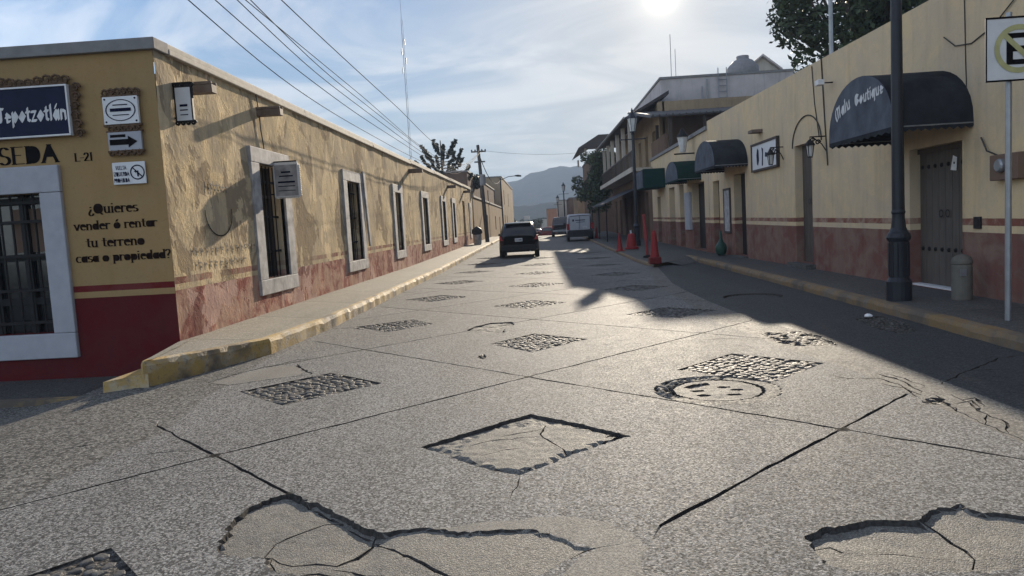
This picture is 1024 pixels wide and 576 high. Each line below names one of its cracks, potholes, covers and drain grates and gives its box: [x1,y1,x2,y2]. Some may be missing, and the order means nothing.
pothole [804,504,1024,574]
crack [837,355,1024,441]
manhole cover [653,376,784,405]
pothole [467,322,515,333]
pothole [421,414,630,475]
